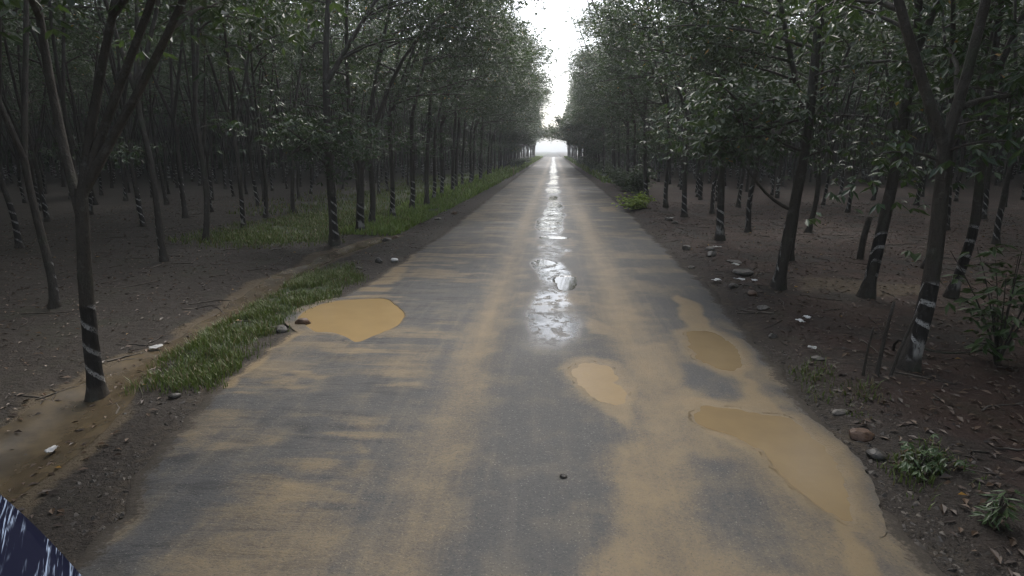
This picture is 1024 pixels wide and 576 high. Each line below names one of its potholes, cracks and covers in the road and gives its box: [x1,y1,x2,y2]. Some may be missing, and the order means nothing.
pothole [528,258,563,266]
pothole [681,400,887,538]
pothole [548,275,583,293]
pothole [559,358,639,410]
pothole [284,296,413,345]
pothole [677,327,761,375]
